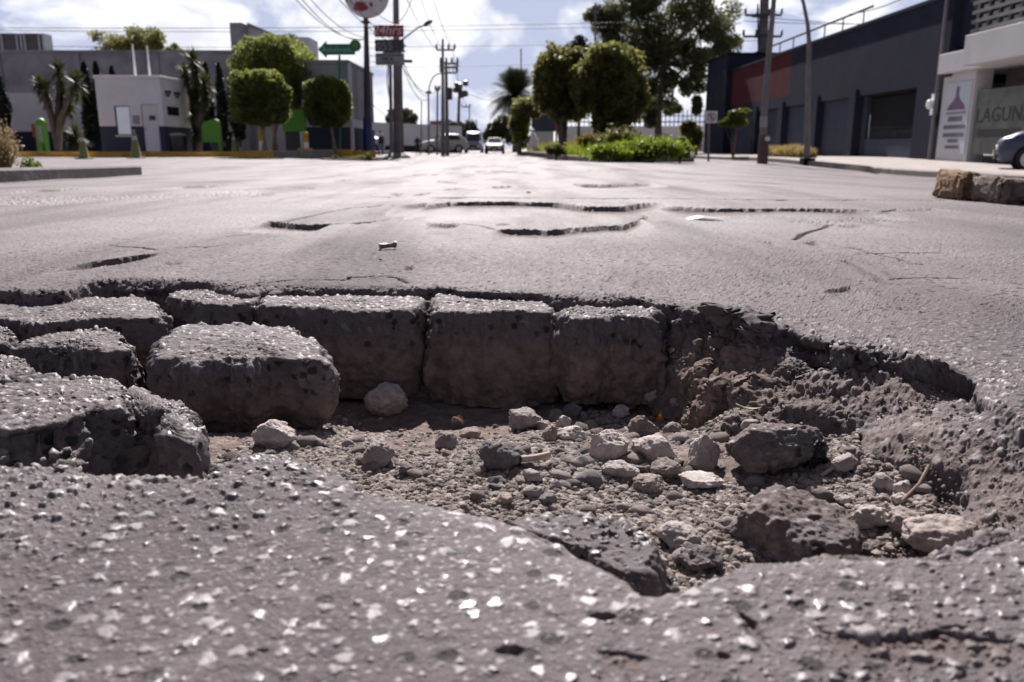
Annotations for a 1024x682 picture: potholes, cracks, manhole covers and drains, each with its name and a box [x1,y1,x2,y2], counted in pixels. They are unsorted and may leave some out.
pothole [0,278,1024,598]
pothole [242,221,333,235]
pothole [494,219,655,246]
crack [814,247,962,301]
crack [791,207,945,241]
pothole [386,201,683,224]
